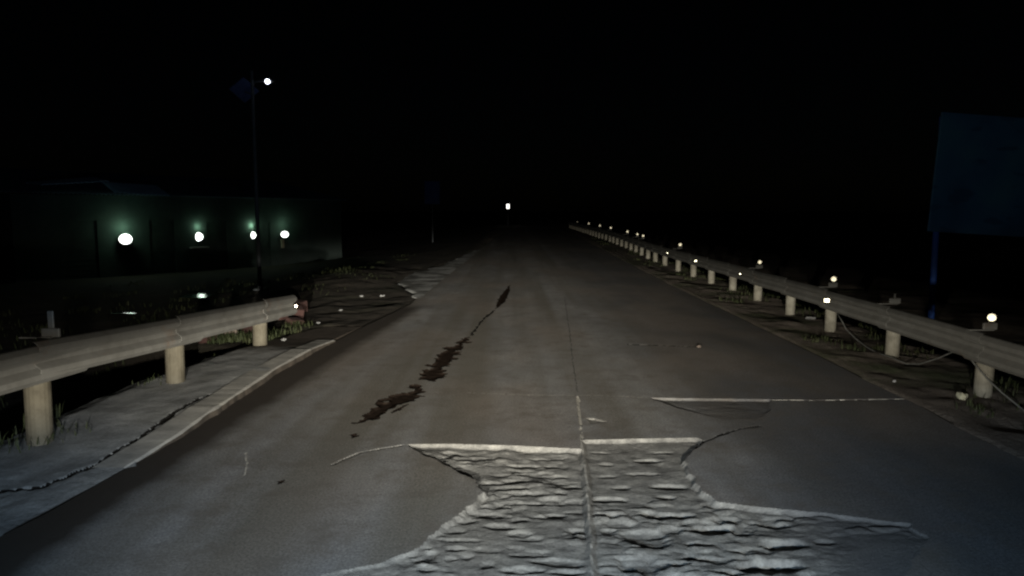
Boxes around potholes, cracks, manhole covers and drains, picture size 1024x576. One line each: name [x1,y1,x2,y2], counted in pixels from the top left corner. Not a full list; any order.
crack [471,310,495,336]
crack [700,425,761,446]
crack [331,445,404,465]
crack [0,393,213,493]
